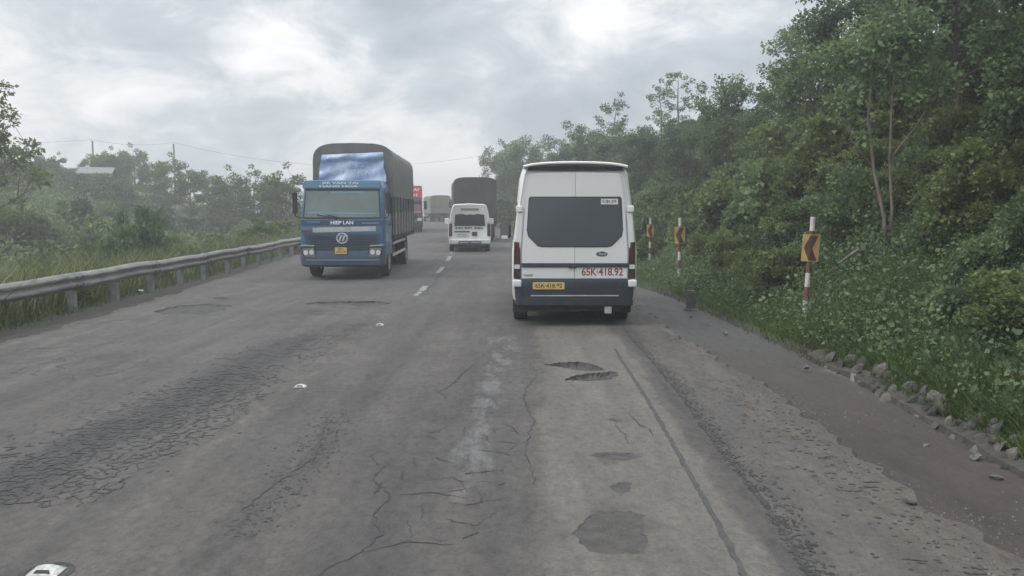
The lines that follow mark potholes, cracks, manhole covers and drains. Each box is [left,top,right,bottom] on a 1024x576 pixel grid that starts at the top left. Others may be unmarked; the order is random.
pothole [565,371,619,381]
pothole [154,304,232,315]
crack [318,362,538,576]
pothole [544,361,603,371]
crack [615,327,1019,576]
crack [0,371,286,507]
